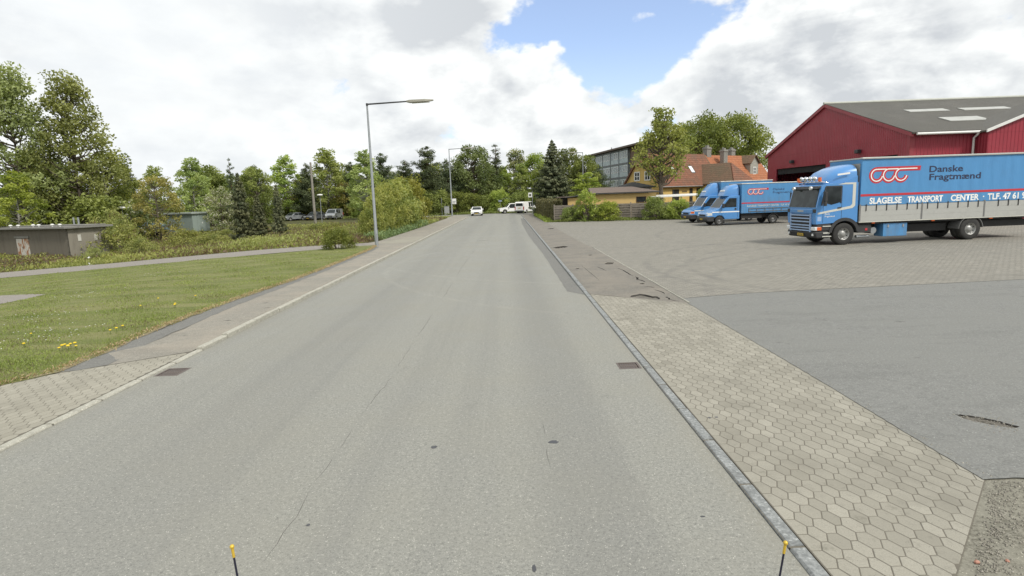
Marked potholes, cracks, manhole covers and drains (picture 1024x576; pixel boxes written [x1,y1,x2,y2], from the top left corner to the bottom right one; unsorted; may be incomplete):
drain grate [153,368,190,377]
